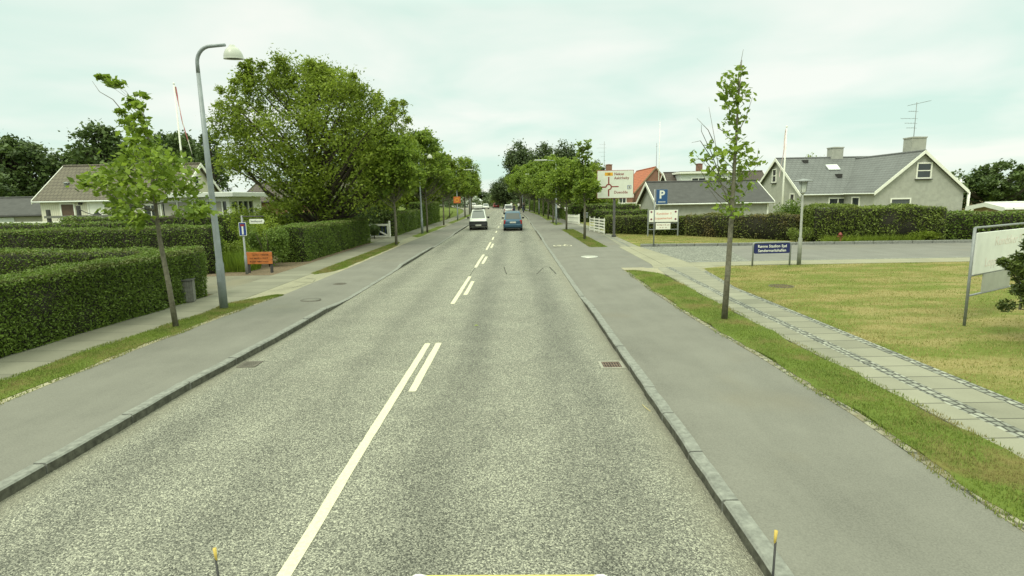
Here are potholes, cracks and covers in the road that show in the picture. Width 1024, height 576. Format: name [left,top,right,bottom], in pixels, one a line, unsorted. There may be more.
drain grate [597,361,626,369]
